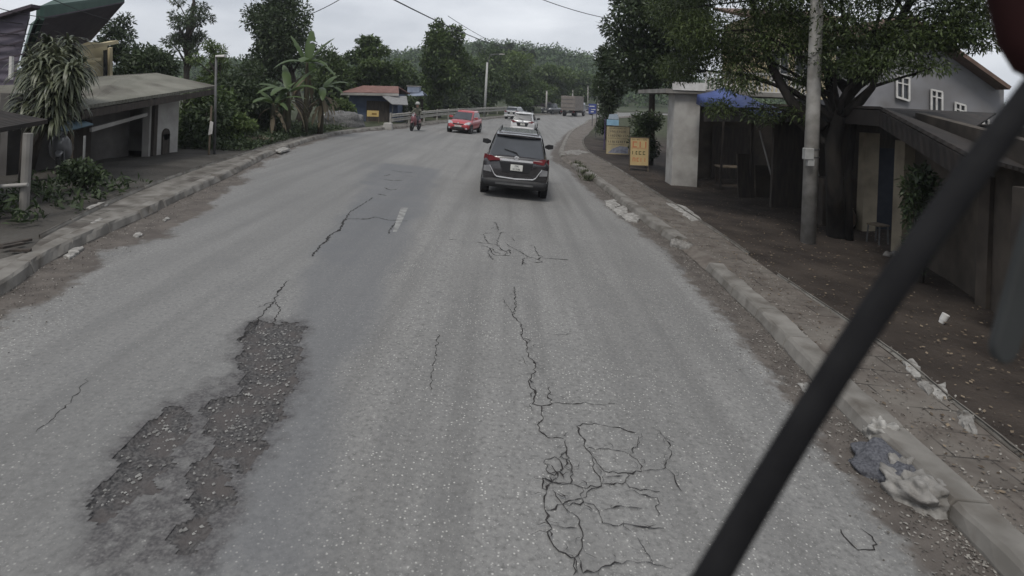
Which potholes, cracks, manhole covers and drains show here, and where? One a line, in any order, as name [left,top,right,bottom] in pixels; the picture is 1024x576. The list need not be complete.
crack [478,222,567,264]
crack [840,529,878,550]
crack [312,172,412,256]
crack [239,280,289,339]
crack [504,287,689,575]
pothole [85,406,211,525]
pothole [164,456,246,556]
pothole [179,320,308,478]
